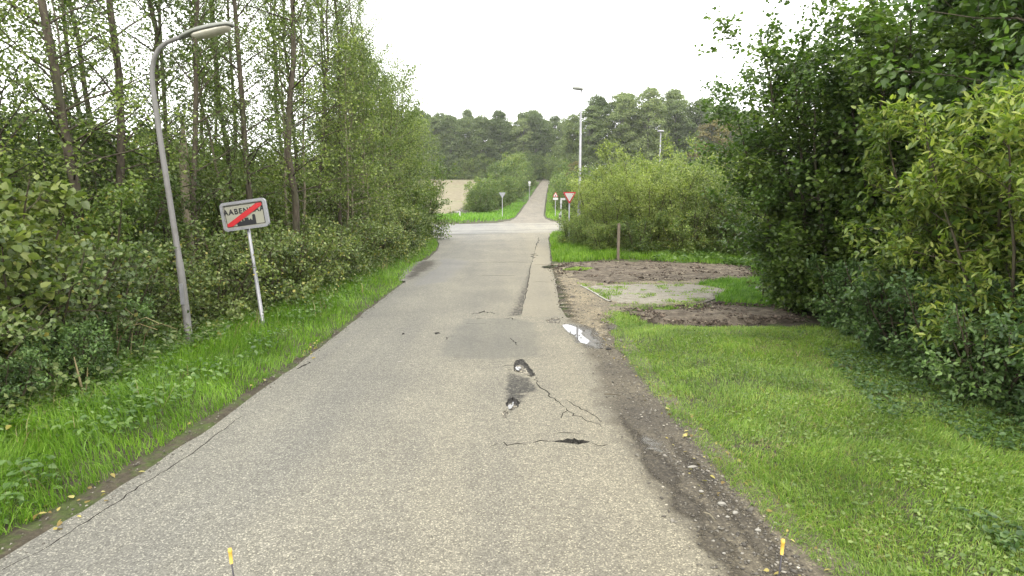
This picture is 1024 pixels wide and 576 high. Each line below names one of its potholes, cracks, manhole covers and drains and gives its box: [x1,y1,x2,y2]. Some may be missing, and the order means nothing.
pothole [505,397,520,410]
crack [490,378,607,447]
pothole [513,359,536,377]
